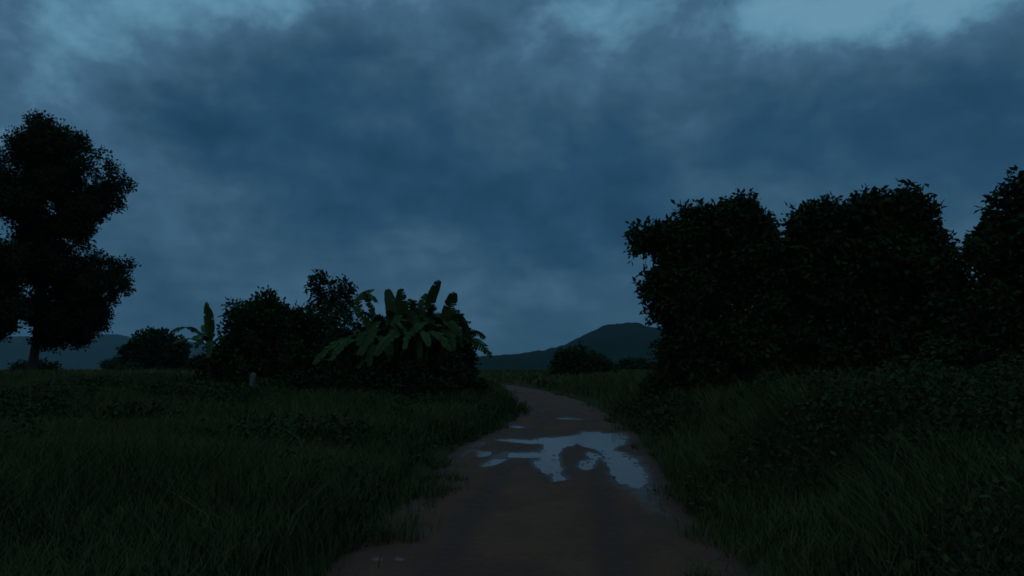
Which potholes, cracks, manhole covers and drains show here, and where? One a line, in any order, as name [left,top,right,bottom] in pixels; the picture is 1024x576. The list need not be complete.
pothole [478,430,655,490]
pothole [459,449,498,458]
